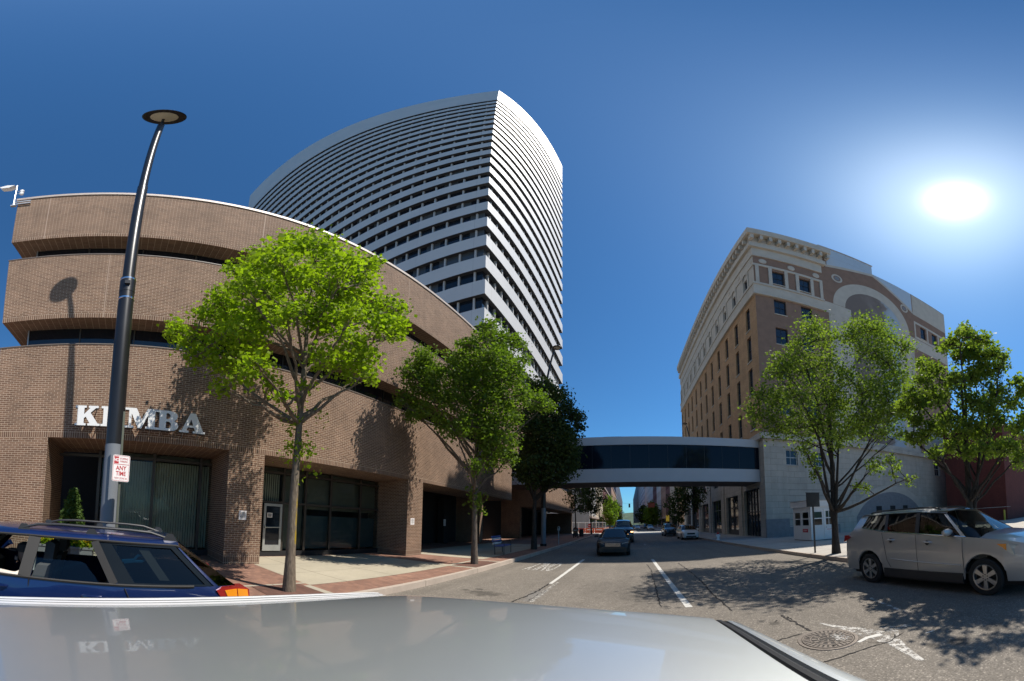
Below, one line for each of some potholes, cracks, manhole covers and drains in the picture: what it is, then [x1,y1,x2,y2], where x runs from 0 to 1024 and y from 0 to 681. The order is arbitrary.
manhole cover [797,629,859,651]
